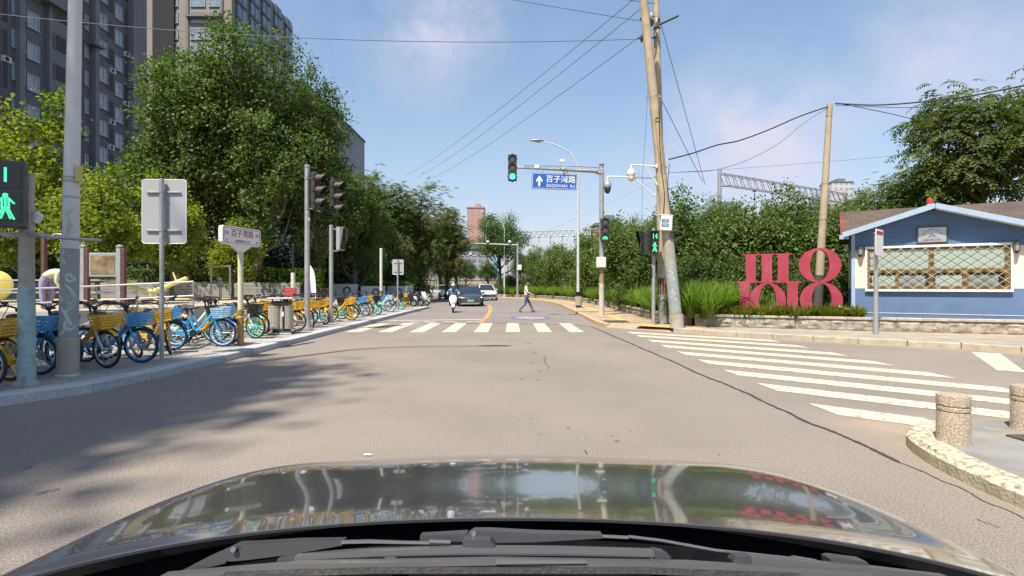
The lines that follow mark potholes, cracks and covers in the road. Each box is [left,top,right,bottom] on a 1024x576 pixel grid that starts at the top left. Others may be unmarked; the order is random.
crack [900,462,1023,528]
